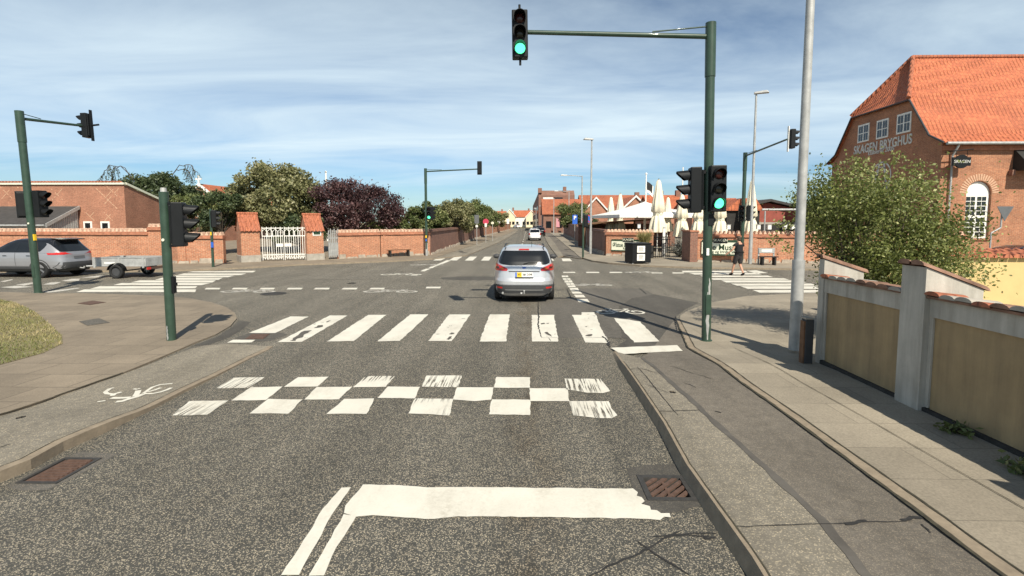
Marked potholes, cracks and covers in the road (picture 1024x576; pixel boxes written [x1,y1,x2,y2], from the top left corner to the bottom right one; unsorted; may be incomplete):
drain grate [15,457,102,484]
crack [589,530,716,576]
drain grate [636,475,699,501]
manhole cover [79,318,110,326]
crack [742,516,931,533]
